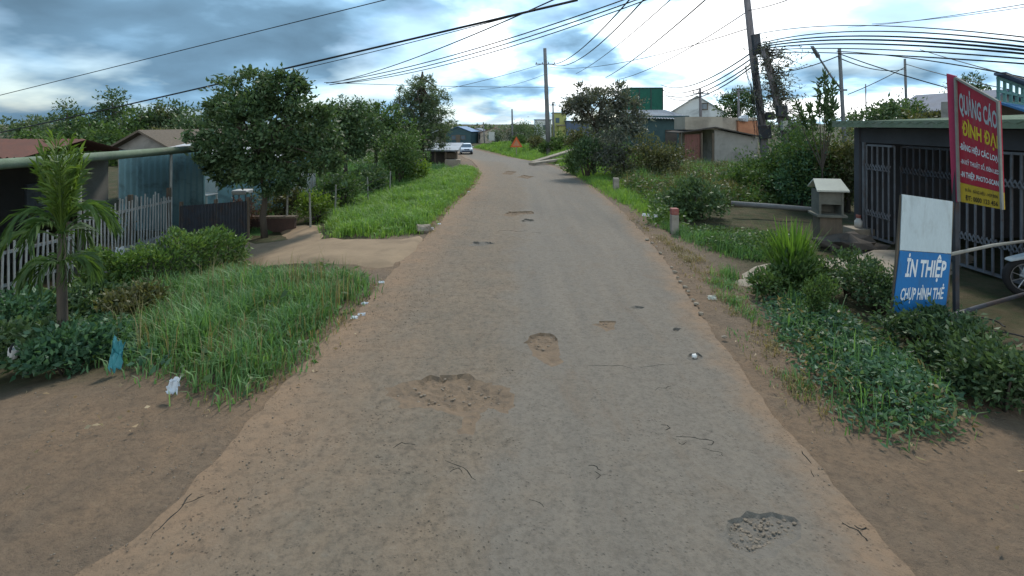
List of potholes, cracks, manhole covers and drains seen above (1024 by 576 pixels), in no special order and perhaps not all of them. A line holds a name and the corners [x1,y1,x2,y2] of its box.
crack [151,493,205,537]
pothole [593,321,616,332]
pothole [385,373,515,435]
crack [661,424,722,456]
pothole [718,511,802,560]
pothole [524,333,564,367]
